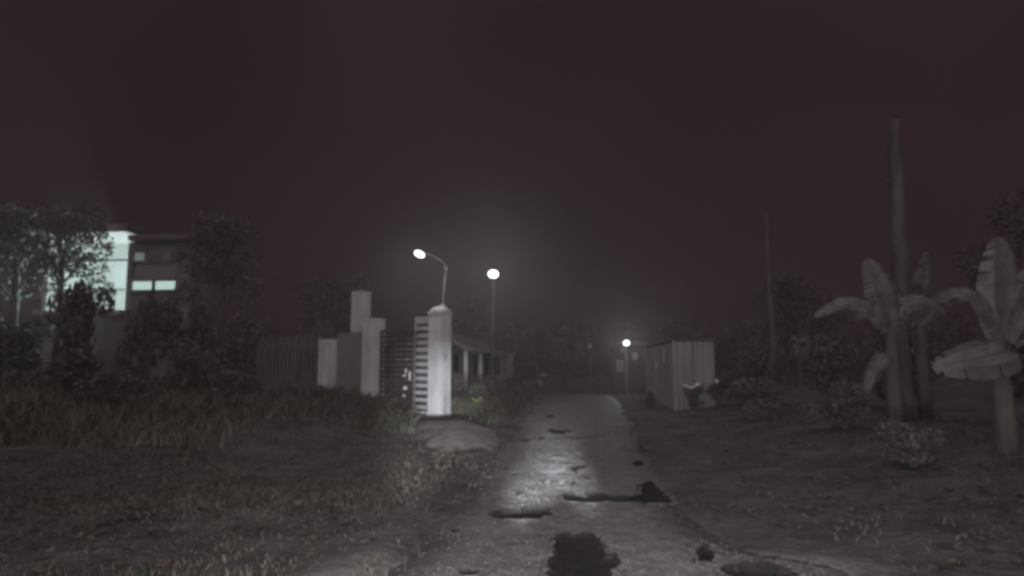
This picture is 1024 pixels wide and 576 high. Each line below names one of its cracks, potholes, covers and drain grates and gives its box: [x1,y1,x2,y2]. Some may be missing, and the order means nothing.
pothole [688,544,722,565]
pothole [557,480,677,507]
pothole [538,531,629,576]
pothole [481,504,560,522]
pothole [712,561,808,576]
